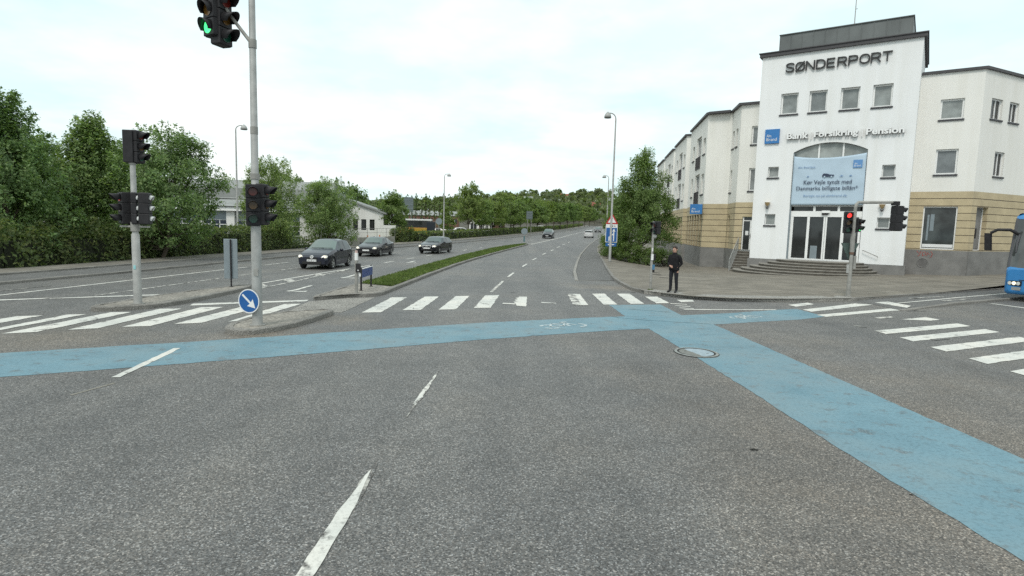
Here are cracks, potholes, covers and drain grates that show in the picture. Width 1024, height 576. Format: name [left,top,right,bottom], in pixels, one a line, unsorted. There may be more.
manhole cover [673,347,720,358]
